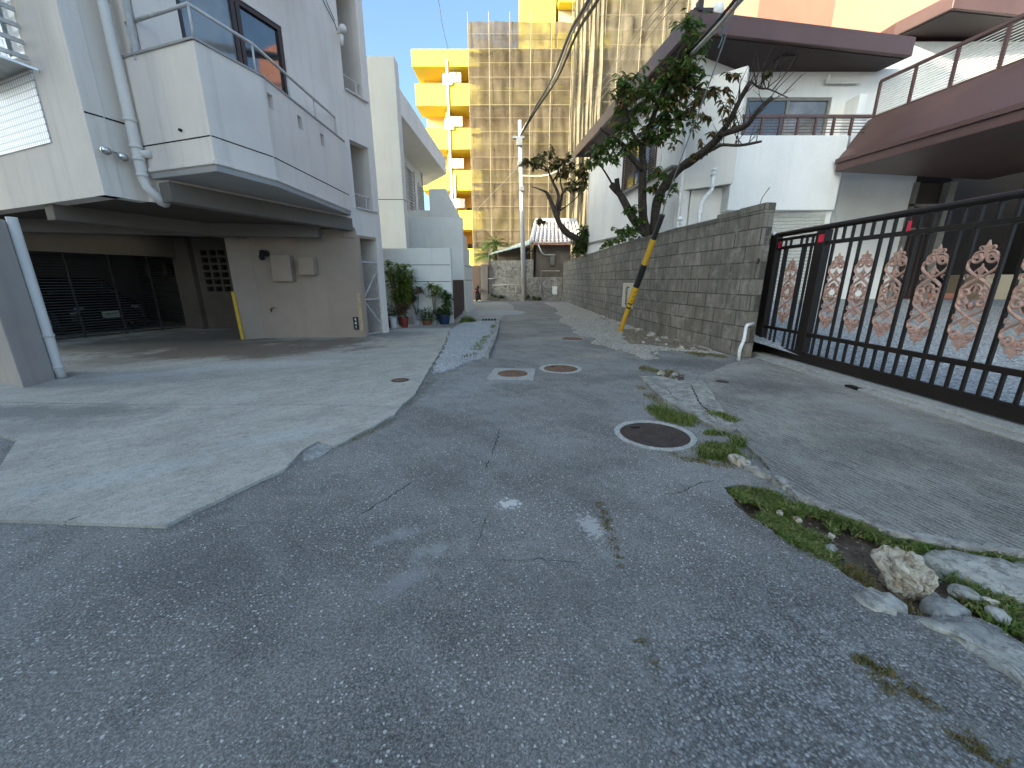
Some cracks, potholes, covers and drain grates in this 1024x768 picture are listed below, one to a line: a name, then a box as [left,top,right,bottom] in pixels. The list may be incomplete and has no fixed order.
crack [474,515,582,564]
crack [654,383,717,419]
manhole cover [614,420,697,451]
manhole cover [540,364,582,374]
pothole [725,486,1024,641]
manhole cover [486,368,536,380]
